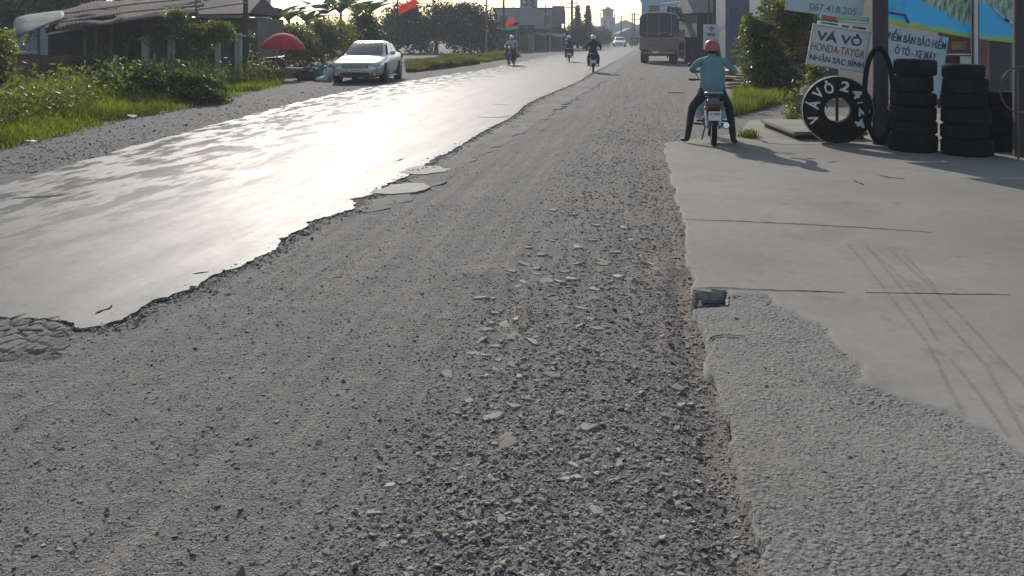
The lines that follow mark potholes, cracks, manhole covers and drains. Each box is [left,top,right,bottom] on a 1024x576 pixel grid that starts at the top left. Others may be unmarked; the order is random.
crack [0,313,76,351]
pothole [691,290,729,309]
